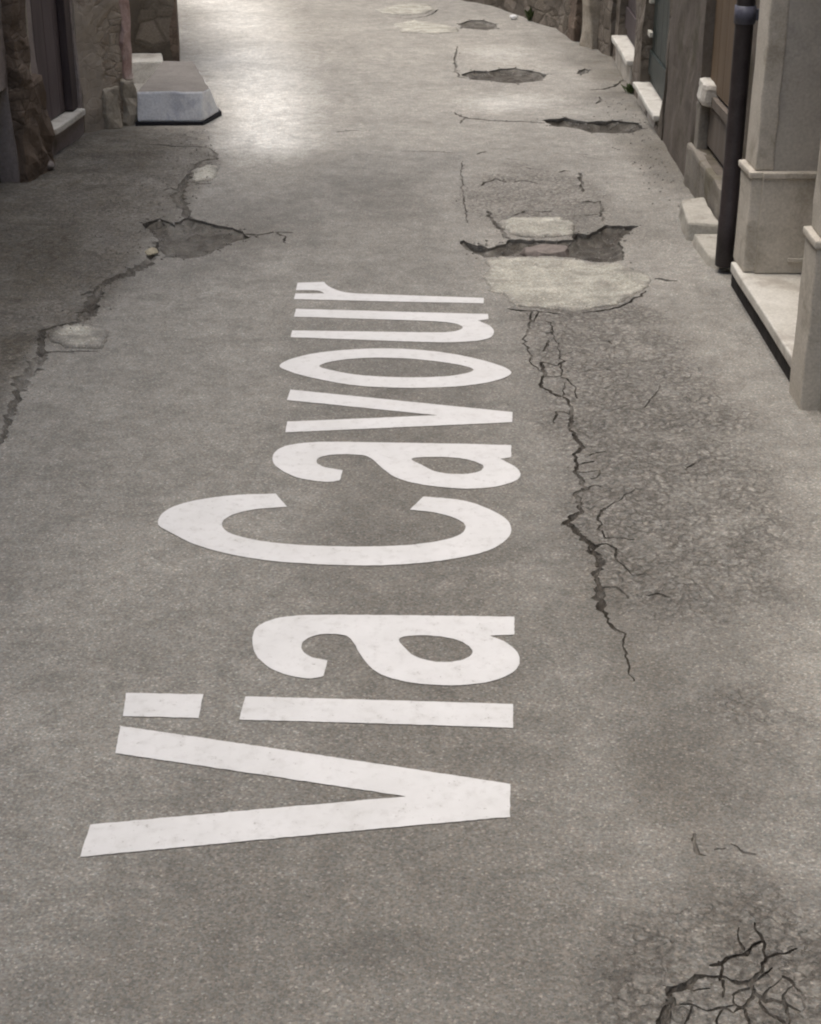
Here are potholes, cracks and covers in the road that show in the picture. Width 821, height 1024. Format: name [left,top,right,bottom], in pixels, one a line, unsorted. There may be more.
crack [454,112,540,123]
pothole [460,225,639,262]
pothole [543,117,643,134]
pothole [461,68,546,83]
crack [507,278,701,681]
crack [431,151,605,240]
pothole [459,20,497,30]
pothole [142,218,250,259]
crack [656,922,802,1024]
crack [453,46,465,78]
crack [134,144,219,219]
crack [691,833,757,856]
